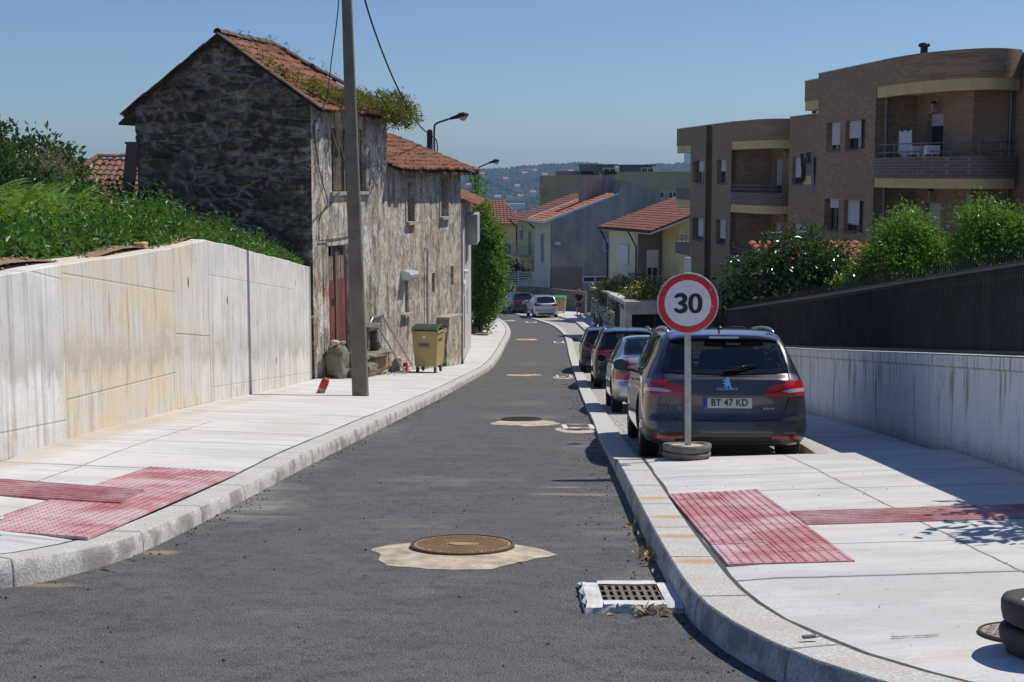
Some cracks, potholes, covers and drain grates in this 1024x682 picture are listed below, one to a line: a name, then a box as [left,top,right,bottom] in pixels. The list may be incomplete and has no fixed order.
manhole cover [978,622,1002,642]
